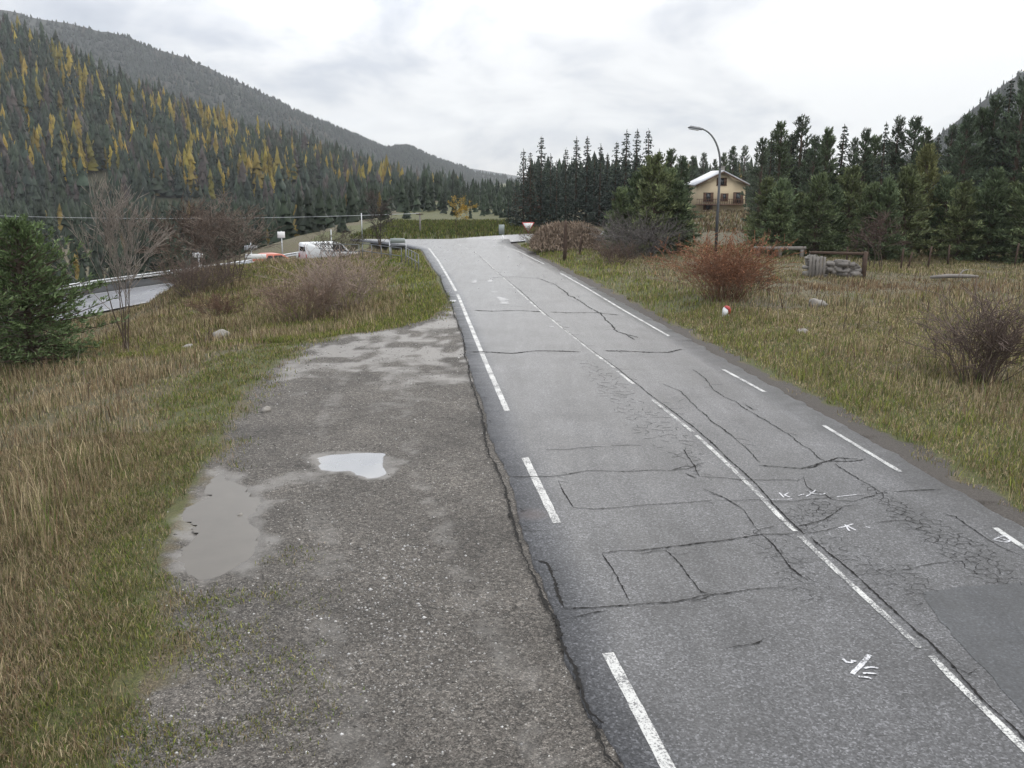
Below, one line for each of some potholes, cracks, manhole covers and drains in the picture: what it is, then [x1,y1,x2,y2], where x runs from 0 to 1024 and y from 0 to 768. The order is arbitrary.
pothole [305,448,399,482]
pothole [157,466,281,585]
crack [439,275,1022,768]
